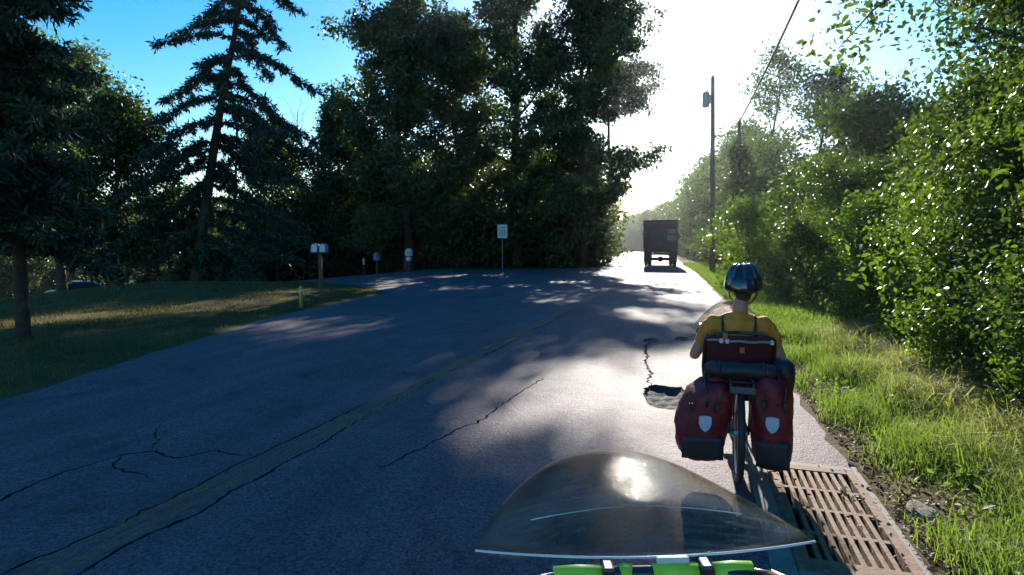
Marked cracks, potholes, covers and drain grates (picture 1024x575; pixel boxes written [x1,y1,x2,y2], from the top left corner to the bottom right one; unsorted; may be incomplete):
crack [643,343,655,387]
drain grate [746,456,933,575]
pothole [642,384,685,410]
